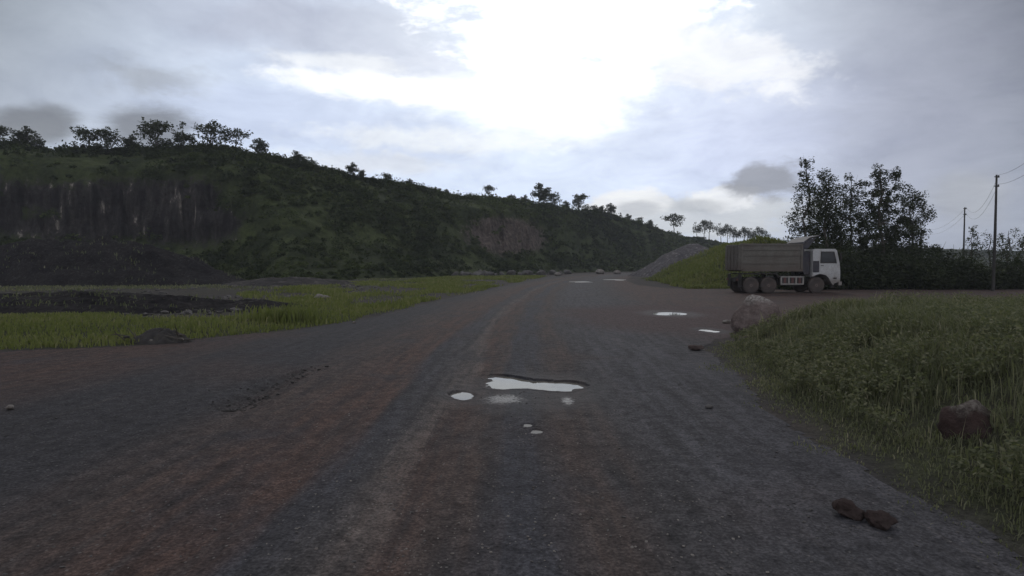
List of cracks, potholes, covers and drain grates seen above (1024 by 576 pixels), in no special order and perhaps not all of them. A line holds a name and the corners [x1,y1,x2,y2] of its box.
pothole [478,374,594,393]
pothole [443,389,481,401]
pothole [523,427,550,436]
